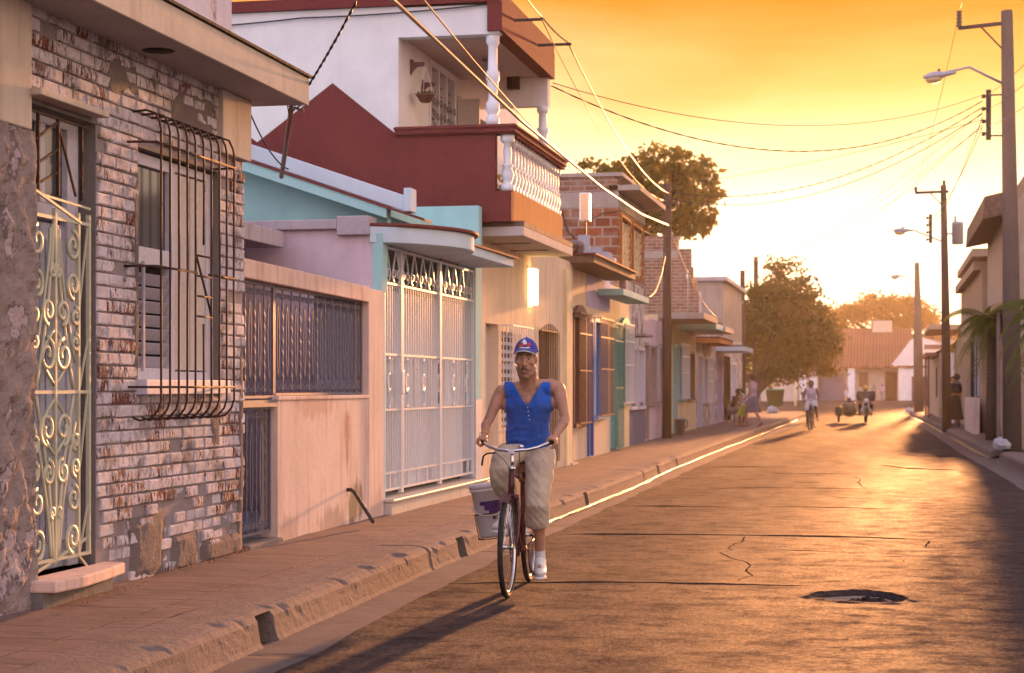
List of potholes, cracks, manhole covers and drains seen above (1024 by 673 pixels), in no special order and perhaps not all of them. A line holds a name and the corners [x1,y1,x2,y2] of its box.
crack [618,466,893,509]
pothole [796,589,922,605]
crack [449,532,930,586]
